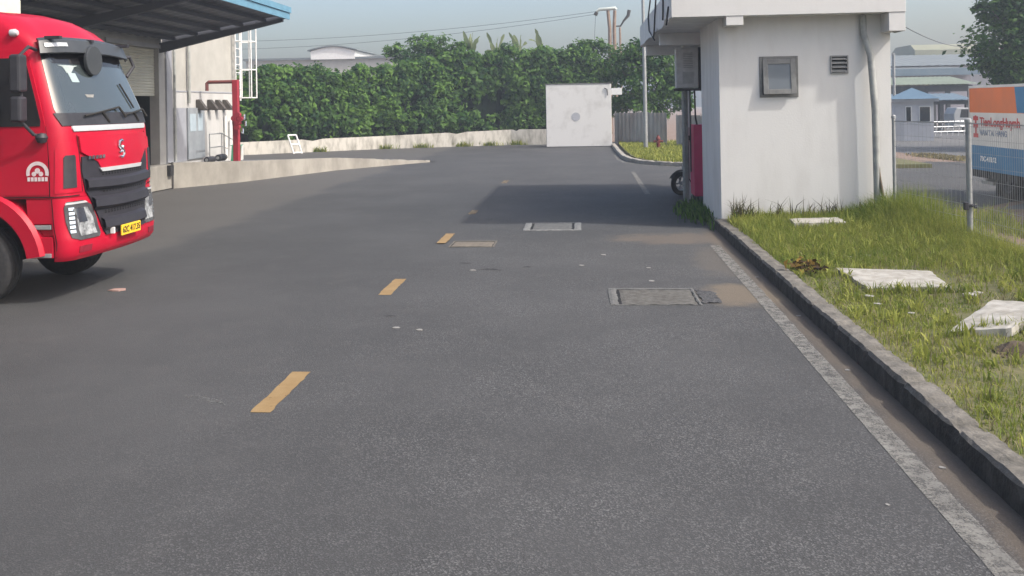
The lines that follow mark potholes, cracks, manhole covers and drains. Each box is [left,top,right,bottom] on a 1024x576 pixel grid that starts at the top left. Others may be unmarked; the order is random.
manhole cover [608,288,703,305]
manhole cover [523,222,581,231]
